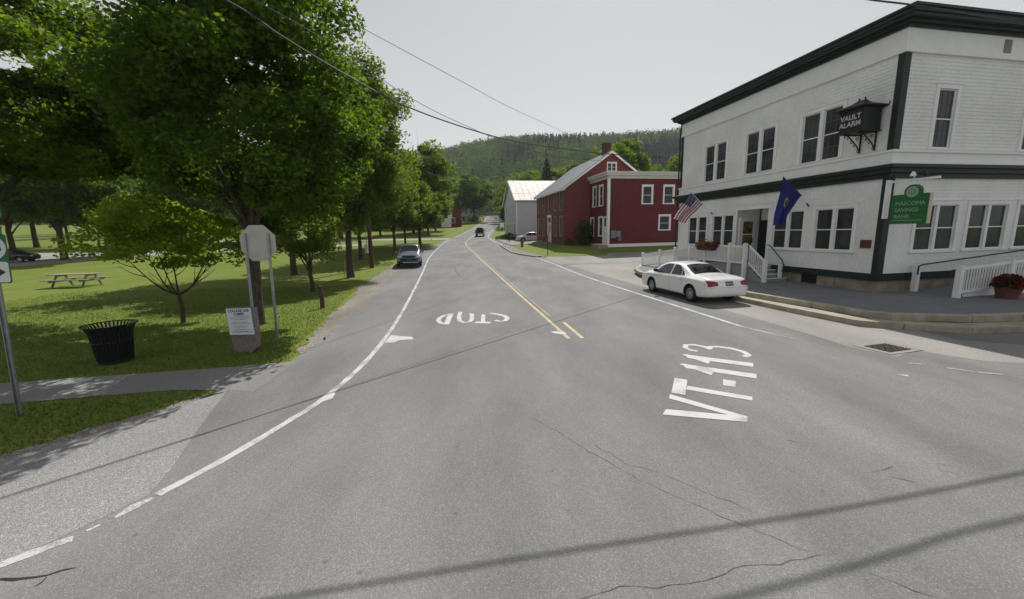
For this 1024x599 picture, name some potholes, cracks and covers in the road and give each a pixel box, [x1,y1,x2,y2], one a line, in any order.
drain grate [854,341,922,354]
crack [536,419,795,547]
crack [581,554,822,599]
